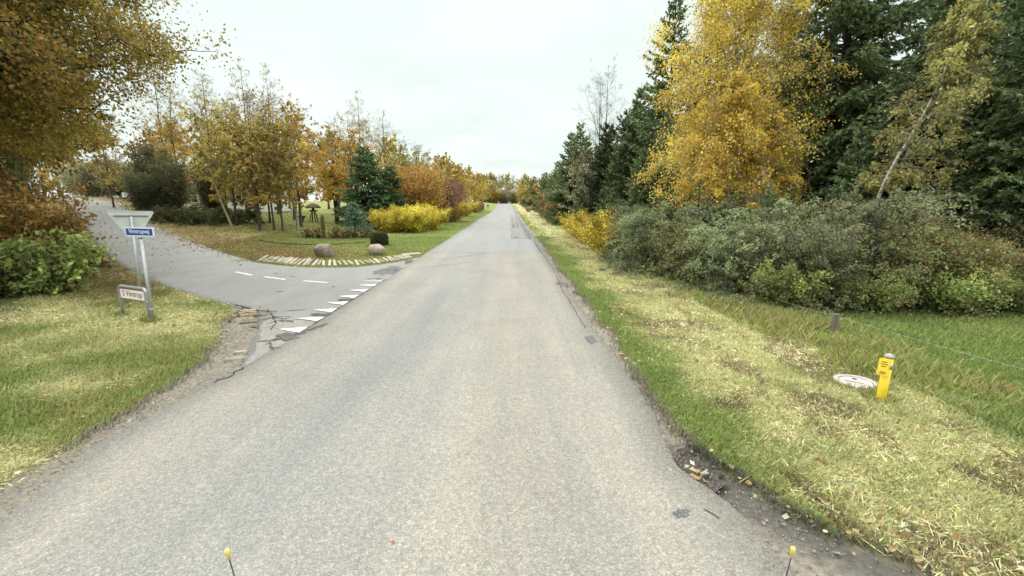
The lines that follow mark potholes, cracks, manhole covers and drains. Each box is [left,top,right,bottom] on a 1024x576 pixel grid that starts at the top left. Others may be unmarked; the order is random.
crack [235,304,299,350]
manhole cover [833,374,878,392]
